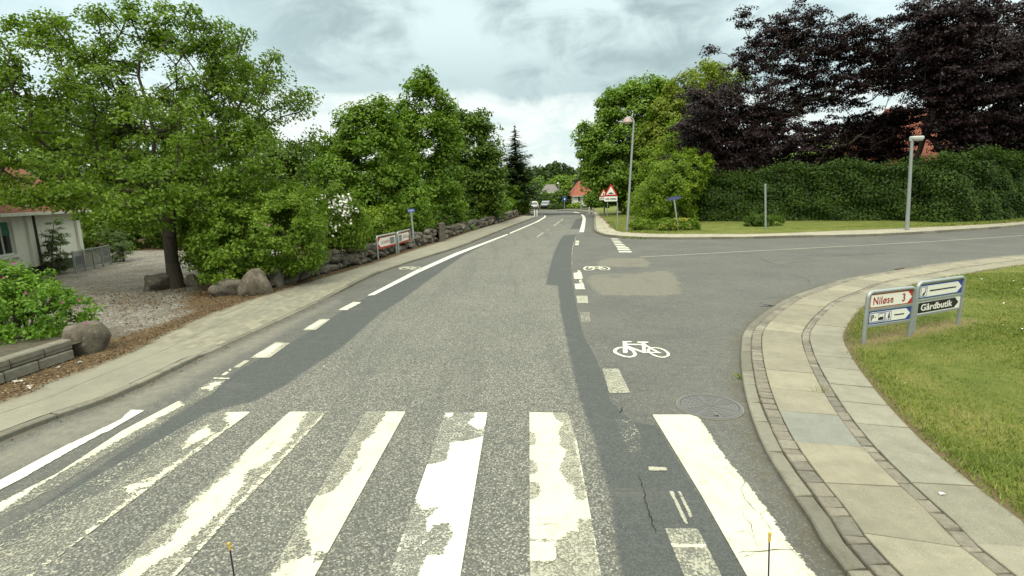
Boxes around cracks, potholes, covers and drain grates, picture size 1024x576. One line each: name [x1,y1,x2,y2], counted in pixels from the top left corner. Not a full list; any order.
manhole cover [676,394,744,420]
crack [730,467,808,568]
